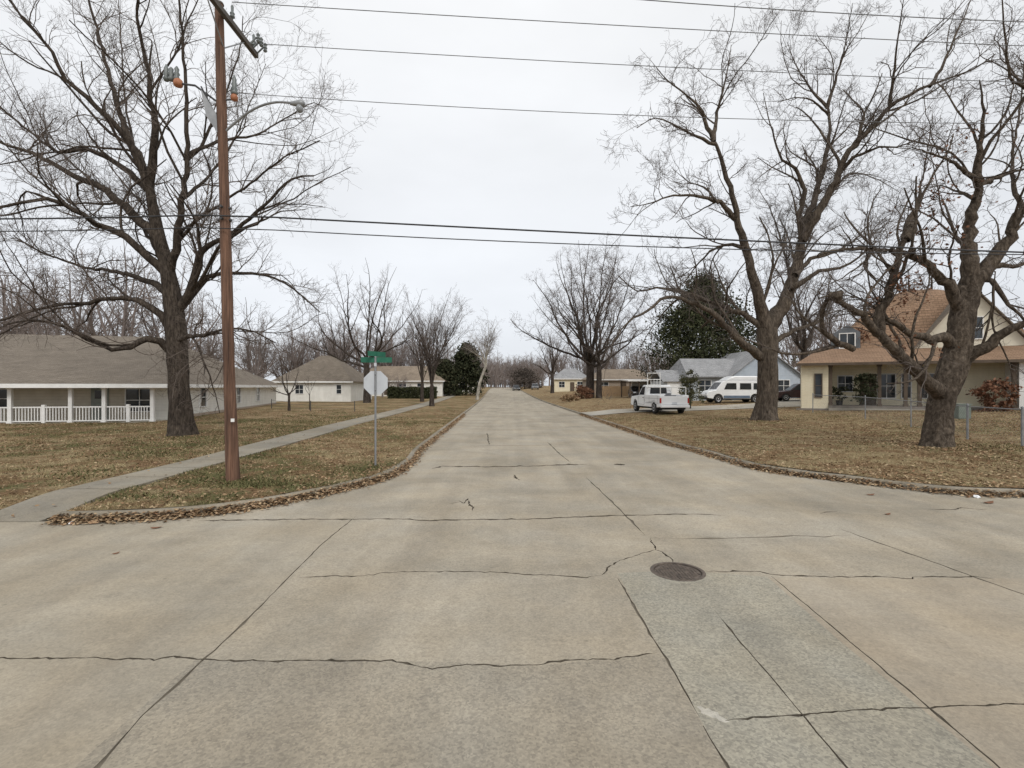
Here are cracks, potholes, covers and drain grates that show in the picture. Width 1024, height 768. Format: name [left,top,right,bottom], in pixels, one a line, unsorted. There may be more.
crack [202,499,720,521]
crack [727,703,1024,721]
crack [708,570,984,579]
crack [436,464,586,479]
manhole cover [650,562,706,581]
crack [315,540,673,578]
crack [0,653,653,670]
